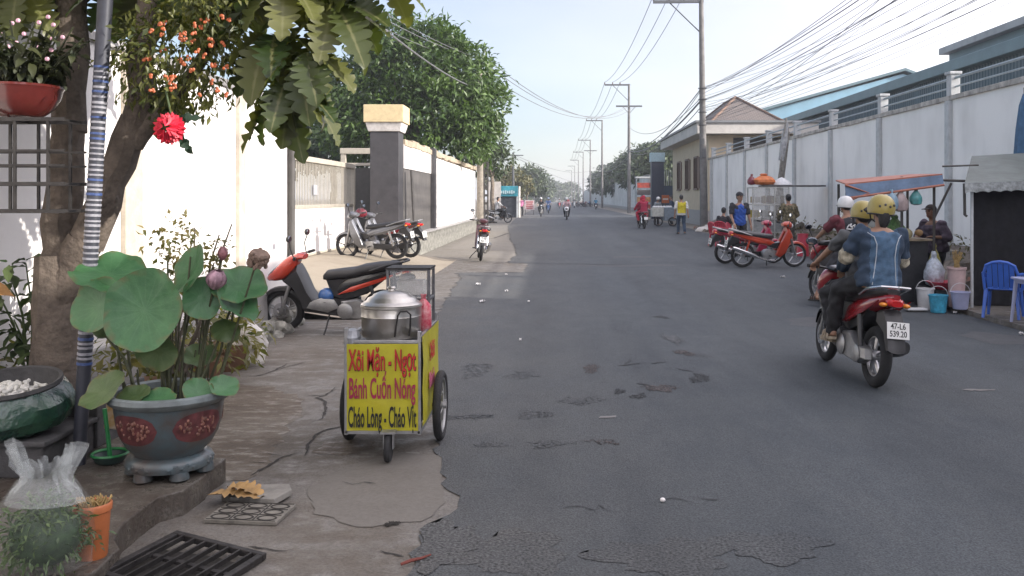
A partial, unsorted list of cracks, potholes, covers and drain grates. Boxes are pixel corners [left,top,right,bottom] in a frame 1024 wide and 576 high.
pothole [689,373,710,383]
manhole cover [204,501,296,526]
crack [250,386,338,476]
pothole [640,385,676,393]
drain grate [105,530,267,576]
